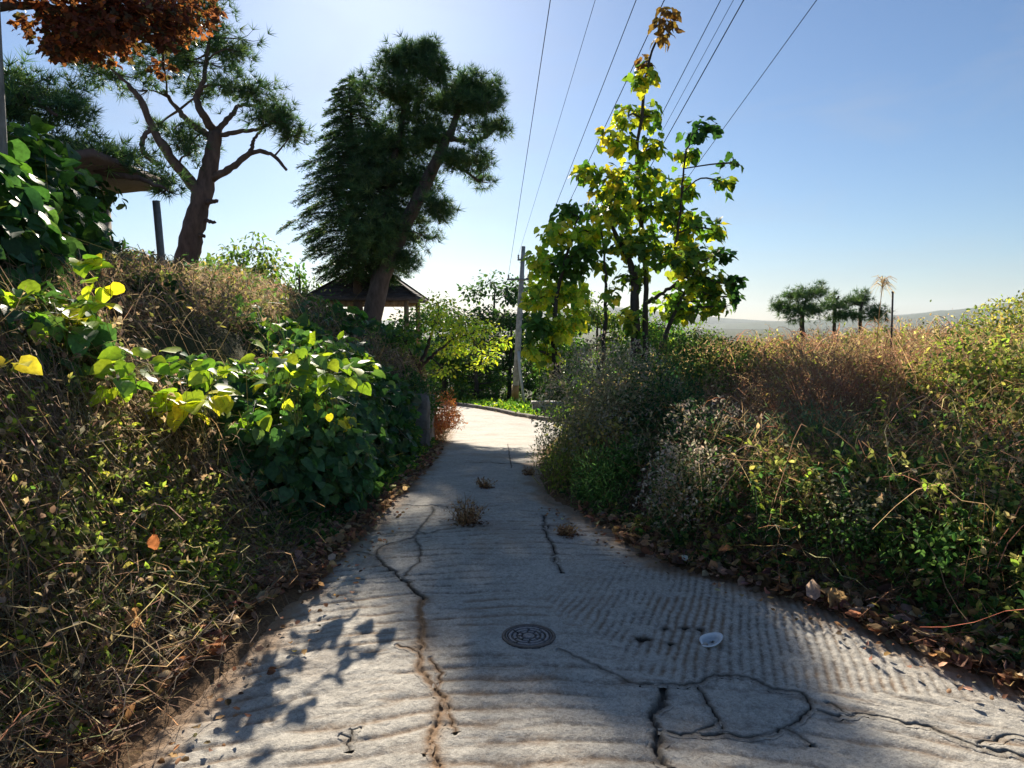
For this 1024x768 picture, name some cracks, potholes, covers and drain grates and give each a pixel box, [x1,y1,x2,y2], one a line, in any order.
crack [352,504,461,768]
crack [539,515,565,573]
manhole cover [502,624,556,649]
crack [338,726,361,754]
pothole [630,634,655,644]
crack [556,647,1024,768]
